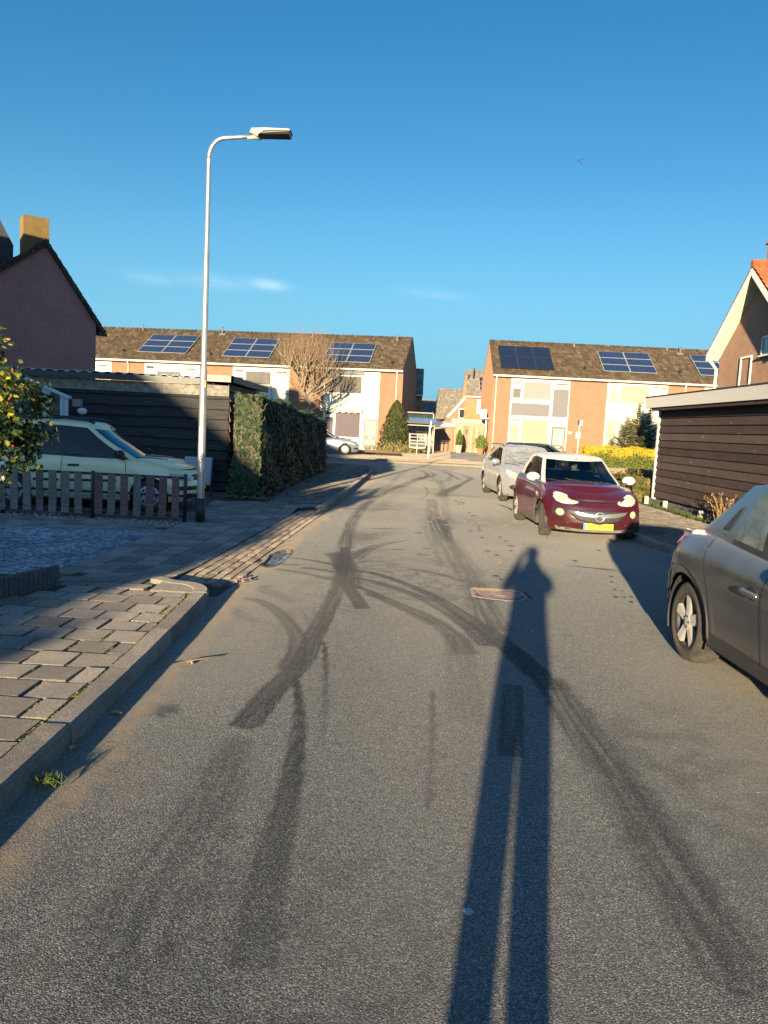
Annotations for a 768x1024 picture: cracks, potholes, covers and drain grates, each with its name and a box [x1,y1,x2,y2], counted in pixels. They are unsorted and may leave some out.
manhole cover [470,587,532,602]
